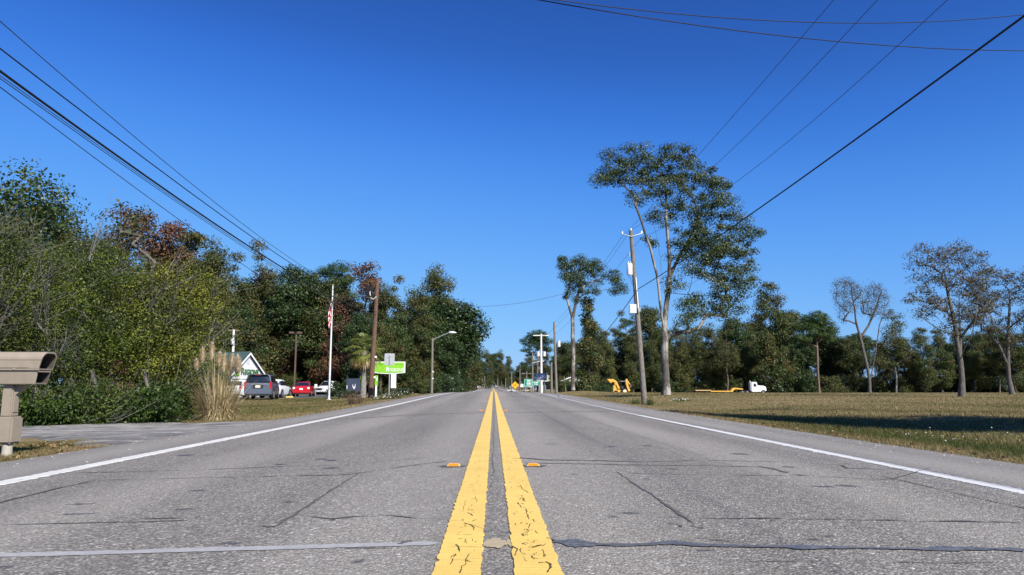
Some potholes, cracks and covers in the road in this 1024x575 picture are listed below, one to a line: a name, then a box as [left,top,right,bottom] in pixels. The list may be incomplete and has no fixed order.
crack [0,451,1024,572]
